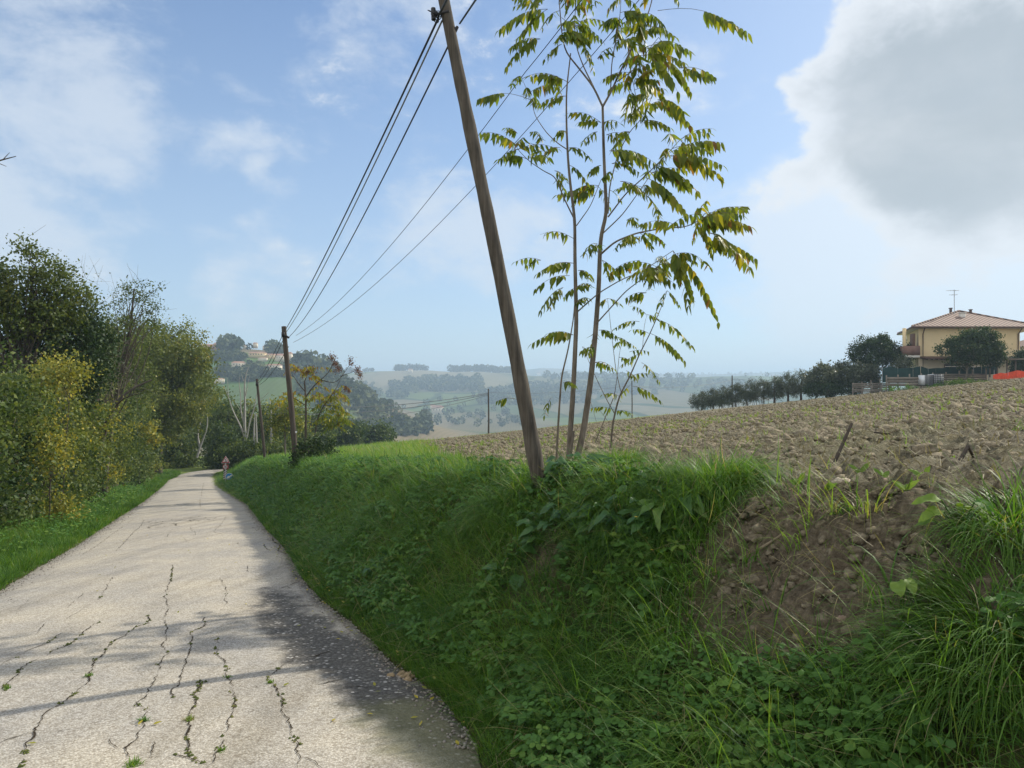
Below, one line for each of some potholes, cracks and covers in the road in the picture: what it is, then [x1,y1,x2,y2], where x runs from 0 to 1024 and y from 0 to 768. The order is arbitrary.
crack [83,516,225,554]
crack [1,565,242,768]
crack [256,659,321,767]
